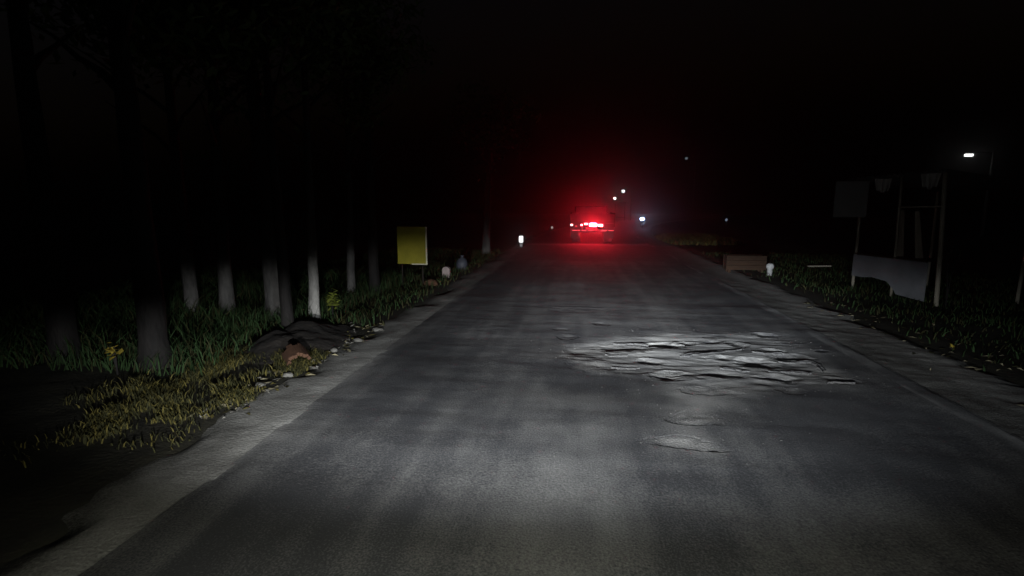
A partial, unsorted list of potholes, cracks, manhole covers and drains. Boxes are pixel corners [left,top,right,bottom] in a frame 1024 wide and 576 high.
pothole [729,355,785,369]
pothole [640,435,729,452]
pothole [815,376,863,384]
pothole [678,385,738,395]
pothole [696,354,736,363]
pothole [697,370,748,379]
pothole [645,369,707,382]
pothole [766,353,818,361]
pothole [665,411,733,425]
pothole [749,373,803,384]
pothole [634,357,668,368]
